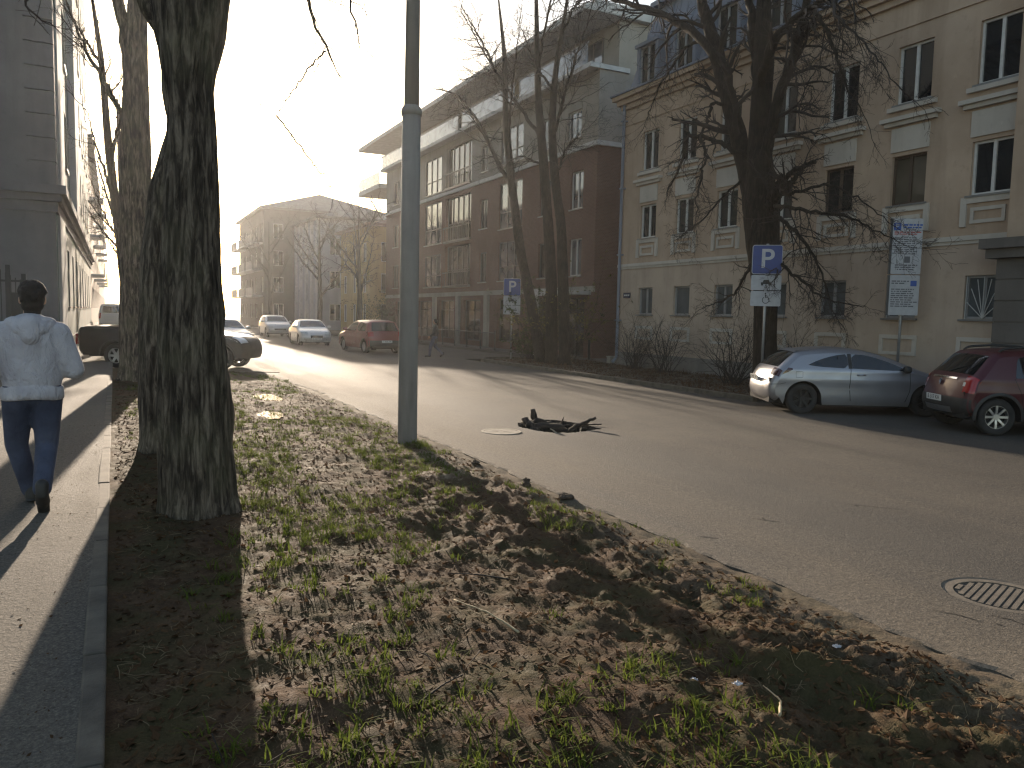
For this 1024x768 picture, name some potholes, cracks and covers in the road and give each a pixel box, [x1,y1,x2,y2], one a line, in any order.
pothole [518,420,601,433]
